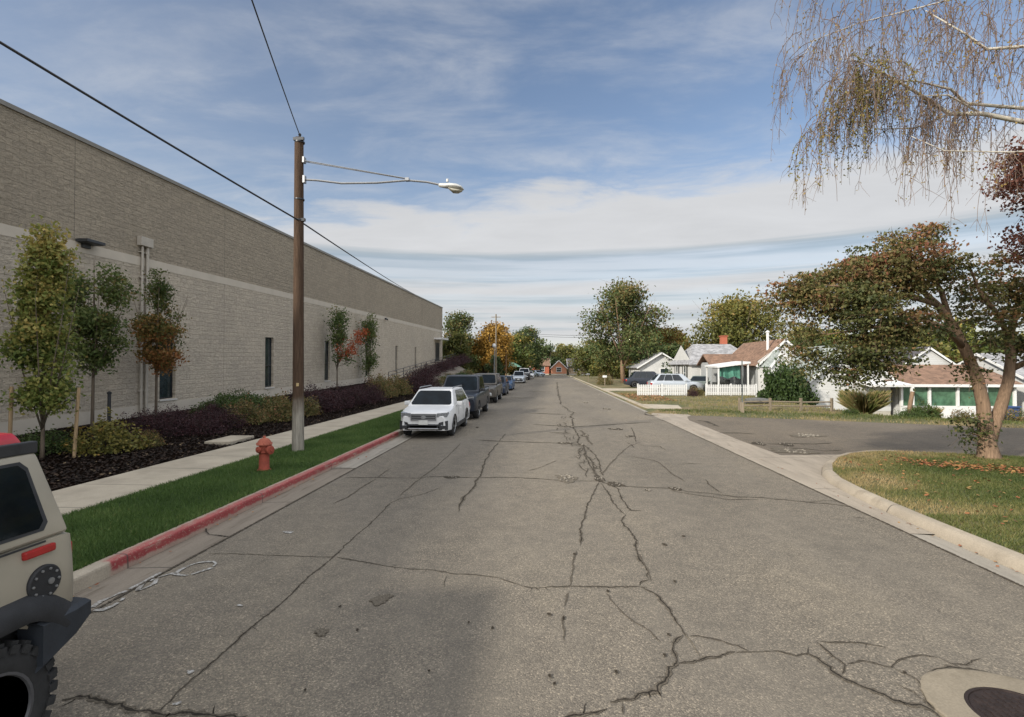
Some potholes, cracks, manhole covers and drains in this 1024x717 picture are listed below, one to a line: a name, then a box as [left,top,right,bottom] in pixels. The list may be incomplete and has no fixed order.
pothole [368,593,394,606]
crack [160,391,991,717]
manhole cover [920,668,1024,717]
